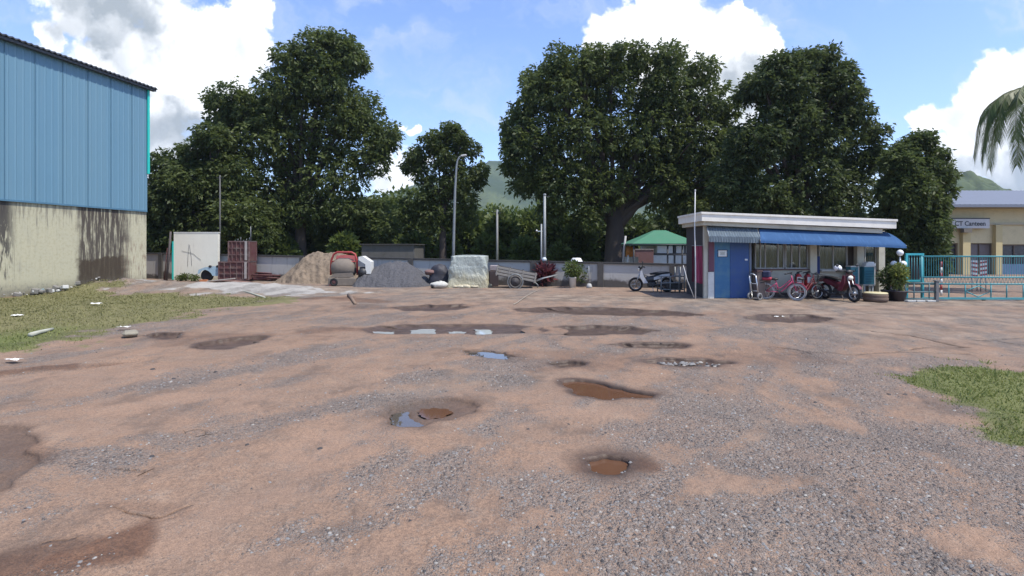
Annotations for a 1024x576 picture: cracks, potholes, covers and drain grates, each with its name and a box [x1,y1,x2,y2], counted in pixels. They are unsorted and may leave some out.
pothole [348,322,568,337]
pothole [0,416,93,508]
pothole [619,354,757,372]
pothole [504,306,714,318]
pothole [536,374,683,408]
pothole [521,324,673,338]
pothole [527,357,608,372]
pothole [126,331,199,343]
pothole [382,303,478,312]
pothole [443,346,536,365]
pothole [349,391,510,438]
pothole [172,333,284,353]
